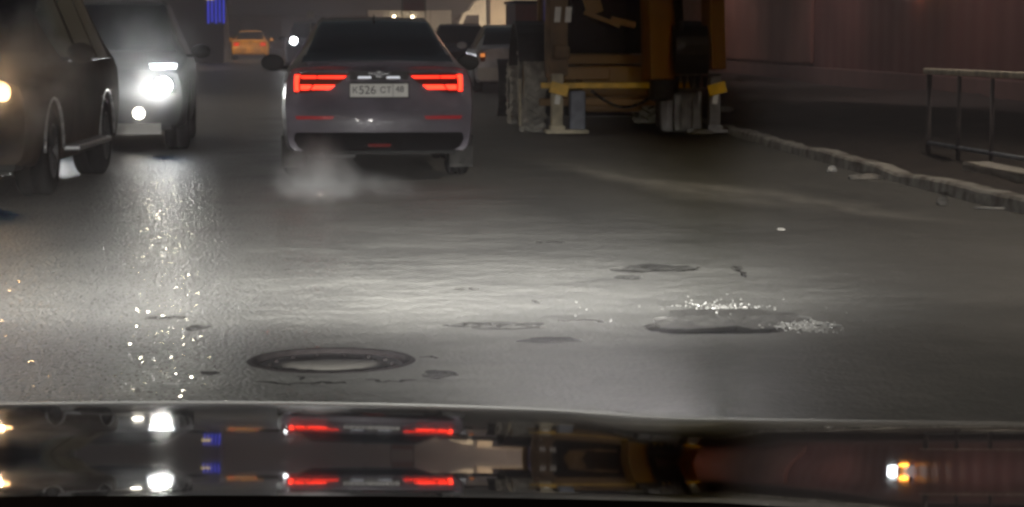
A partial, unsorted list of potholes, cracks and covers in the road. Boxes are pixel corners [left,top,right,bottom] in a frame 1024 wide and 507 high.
manhole cover [246,348,416,374]
pothole [443,322,546,330]
pothole [422,370,459,379]
pothole [644,306,843,334]
crack [255,376,346,385]
pothole [609,264,701,272]
